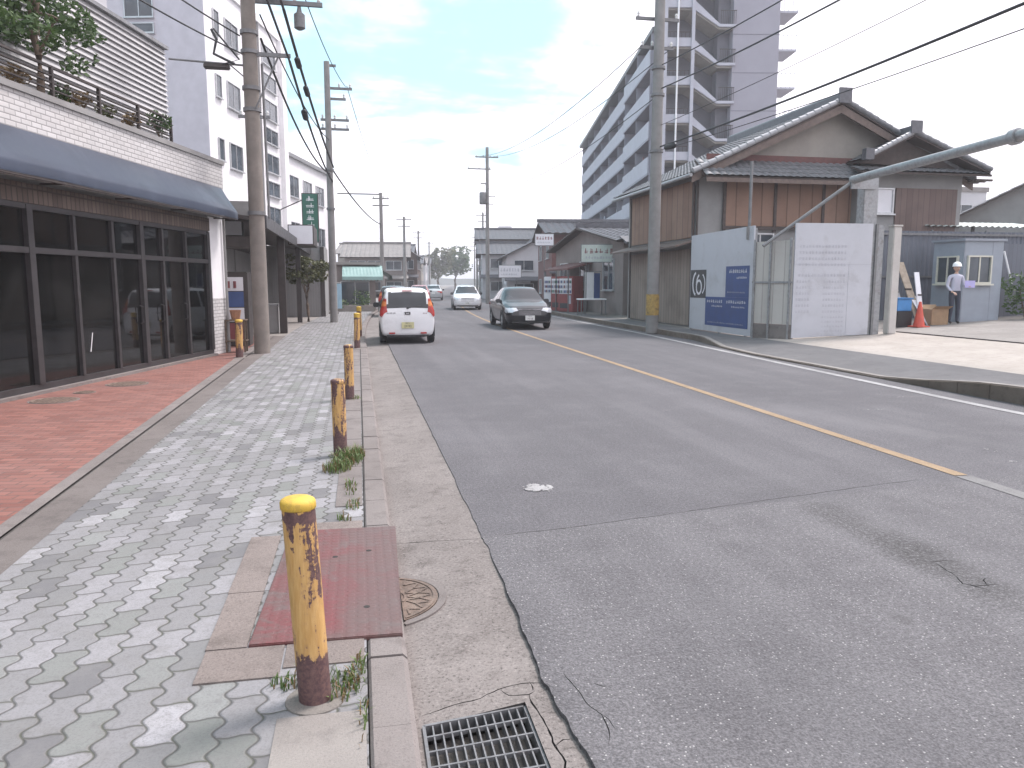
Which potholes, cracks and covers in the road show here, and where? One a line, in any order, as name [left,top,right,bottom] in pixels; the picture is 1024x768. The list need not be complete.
crack [934,560,995,593]
manhole cover [399,575,447,626]
crack [426,674,614,768]
drain grate [422,702,551,768]
